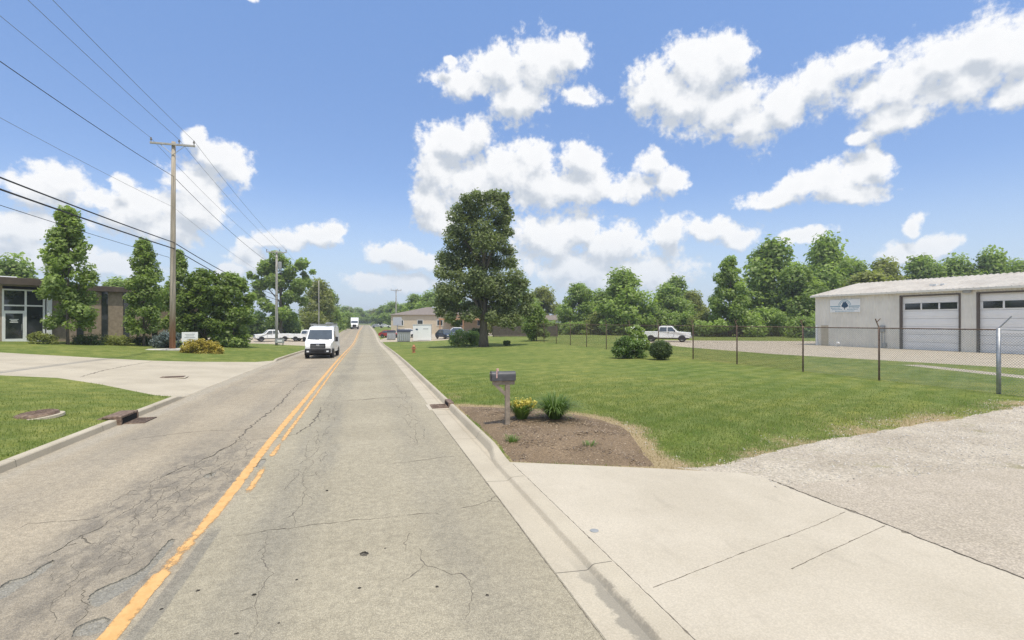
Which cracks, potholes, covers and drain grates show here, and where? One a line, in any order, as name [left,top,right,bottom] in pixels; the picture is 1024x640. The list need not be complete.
drain grate [98,410,157,425]
drain grate [426,399,454,410]
crack [16,367,496,640]
manhole cover [13,409,66,420]
